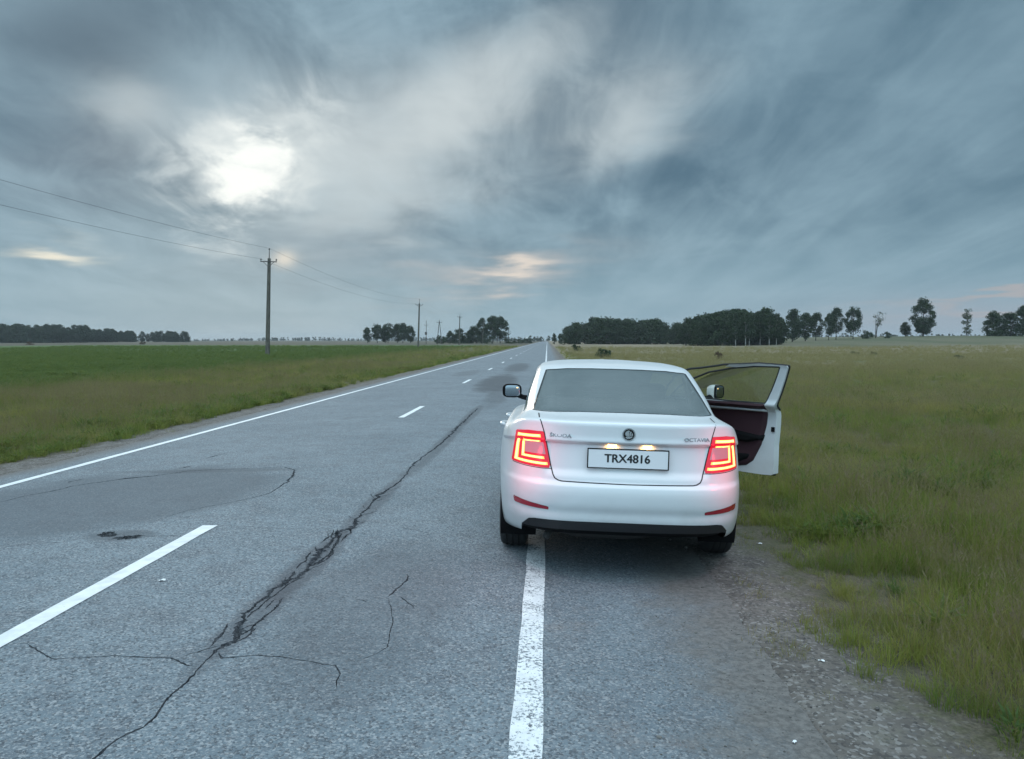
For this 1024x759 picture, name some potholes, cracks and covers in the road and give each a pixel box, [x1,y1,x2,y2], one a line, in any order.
crack [17,409,477,759]
